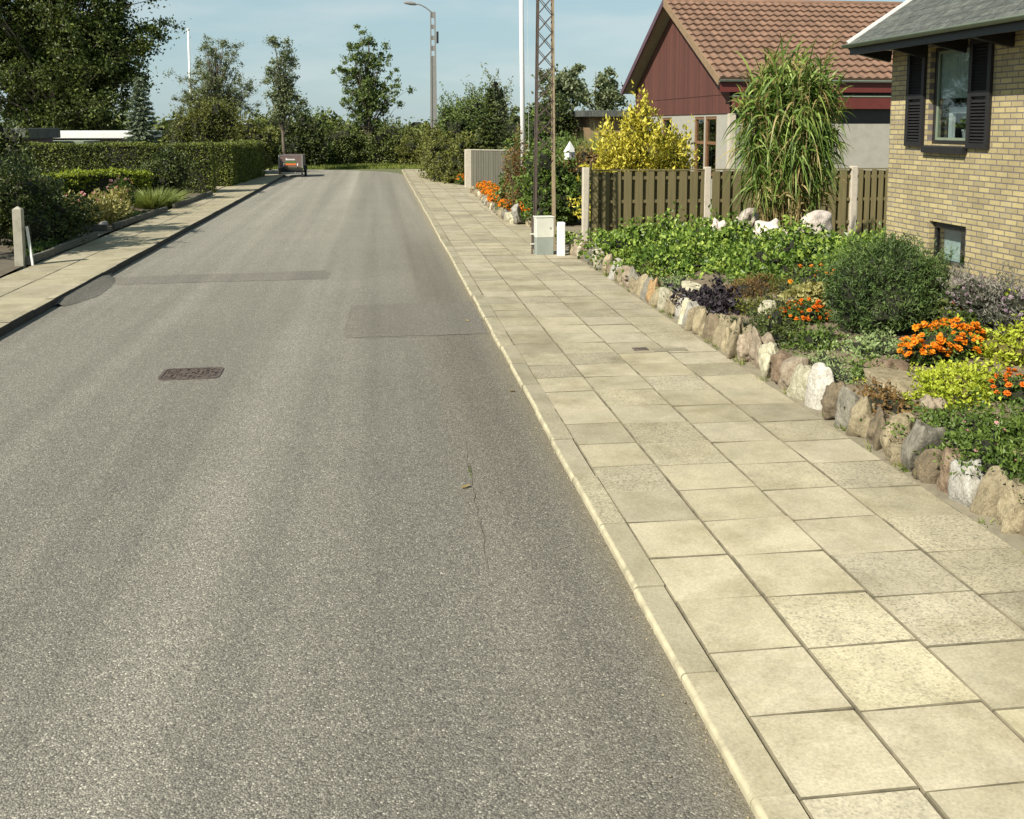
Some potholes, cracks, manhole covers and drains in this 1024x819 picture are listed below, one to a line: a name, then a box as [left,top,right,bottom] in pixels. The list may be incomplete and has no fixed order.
manhole cover [158,367,224,381]
crack [466,447,487,562]
